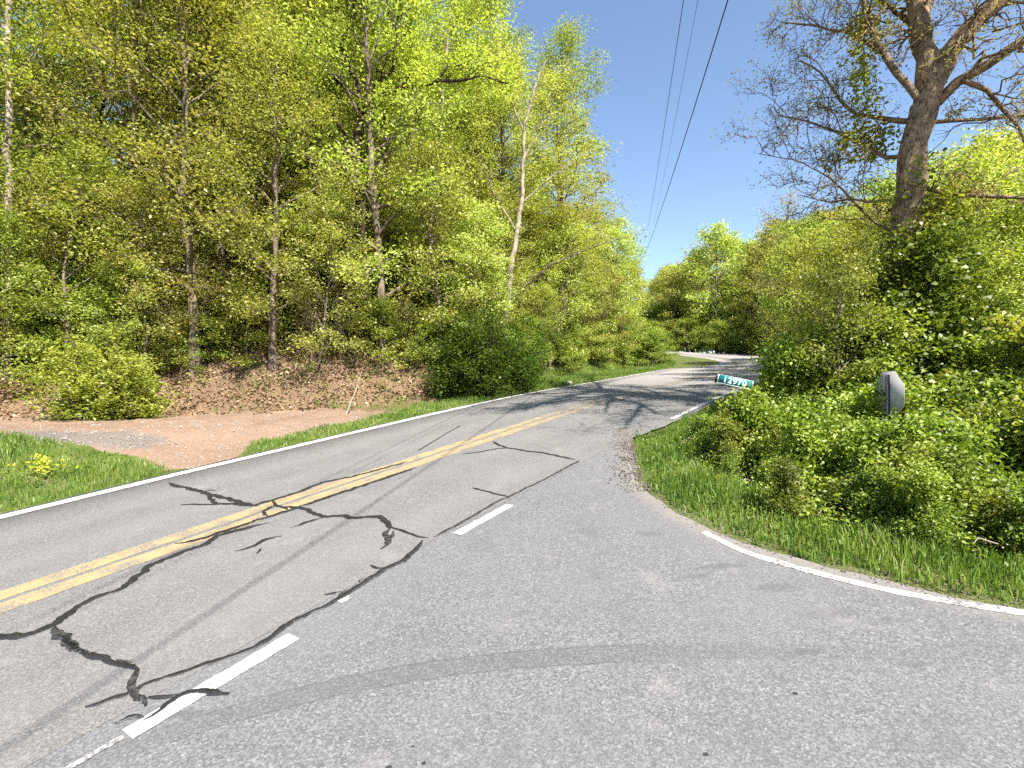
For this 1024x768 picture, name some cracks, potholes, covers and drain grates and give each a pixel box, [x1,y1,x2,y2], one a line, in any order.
crack [418,426,575,460]
